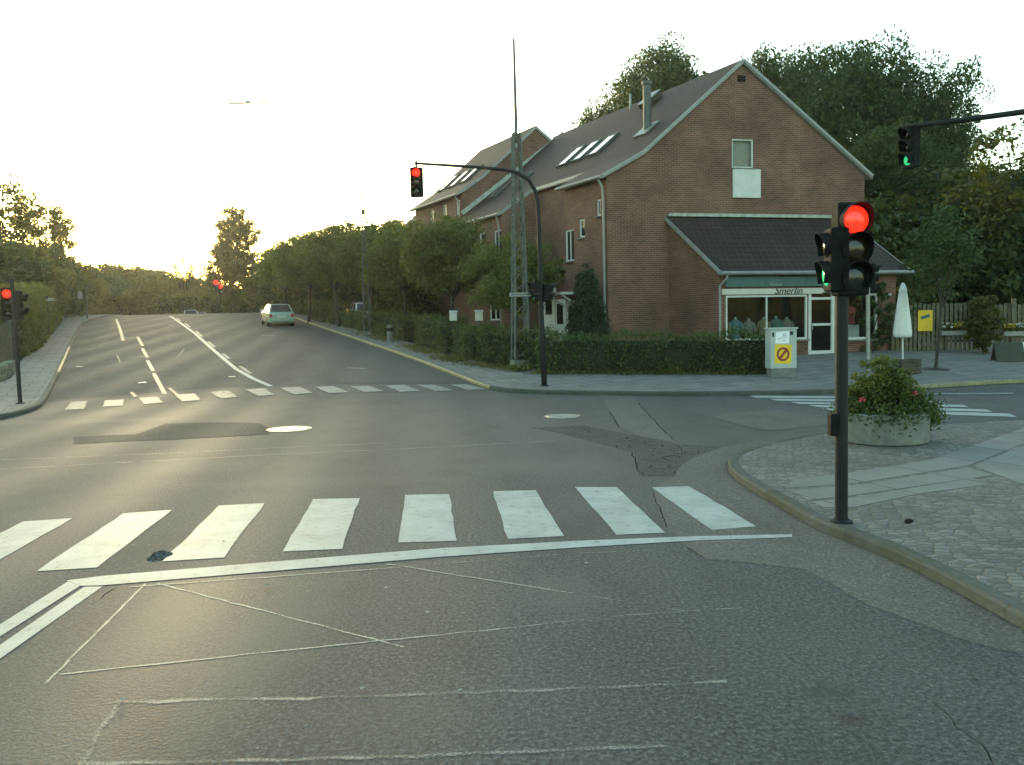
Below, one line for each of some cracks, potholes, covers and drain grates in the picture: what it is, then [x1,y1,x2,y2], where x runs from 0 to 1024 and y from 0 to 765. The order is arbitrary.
pothole [146,550,173,562]
crack [551,402,699,529]
crack [931,701,995,765]
